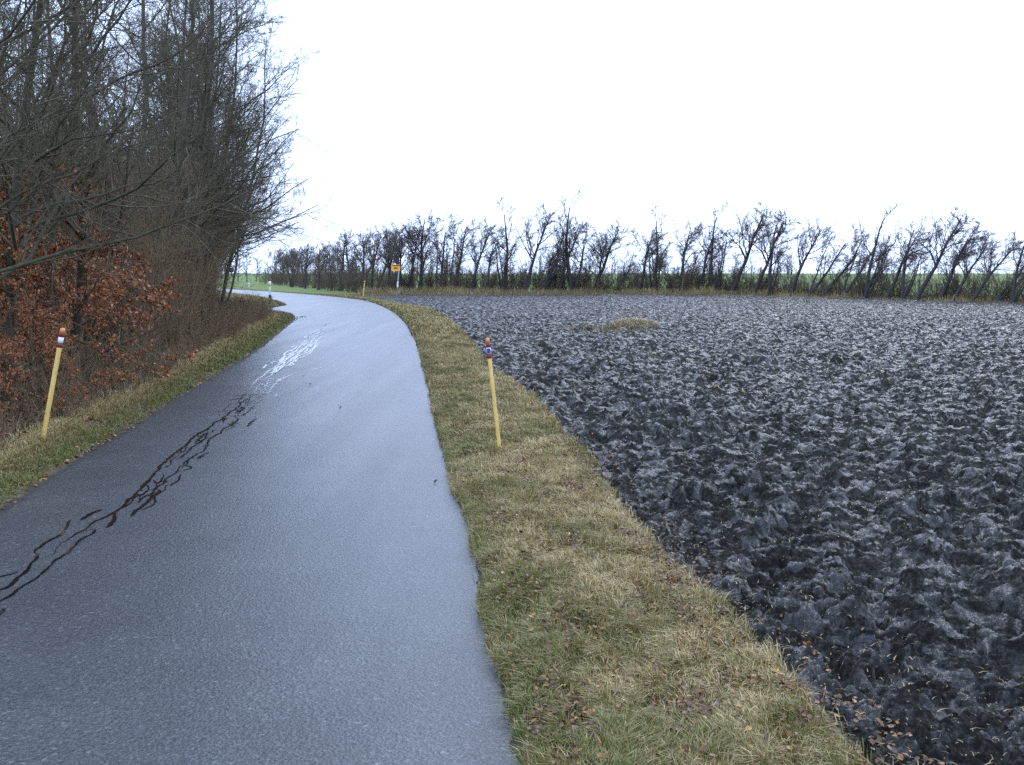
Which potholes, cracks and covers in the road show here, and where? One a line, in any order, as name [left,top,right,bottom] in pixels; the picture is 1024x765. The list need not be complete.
crack [0,326,335,614]
